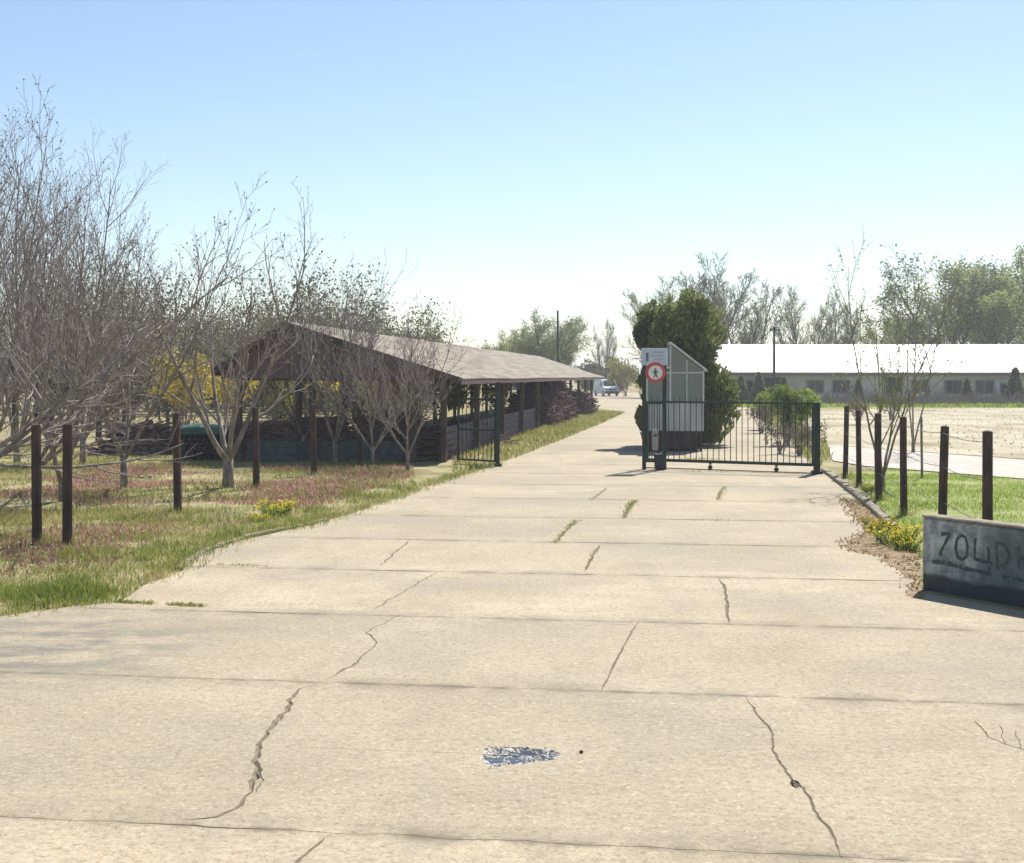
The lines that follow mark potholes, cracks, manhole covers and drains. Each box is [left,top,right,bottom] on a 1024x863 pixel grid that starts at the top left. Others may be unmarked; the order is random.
pothole [479,745,571,769]
crack [746,697,842,858]
crack [718,578,730,623]
crack [601,622,638,691]
crack [584,545,600,571]
crack [974,720,1024,750]
crack [189,571,439,820]
